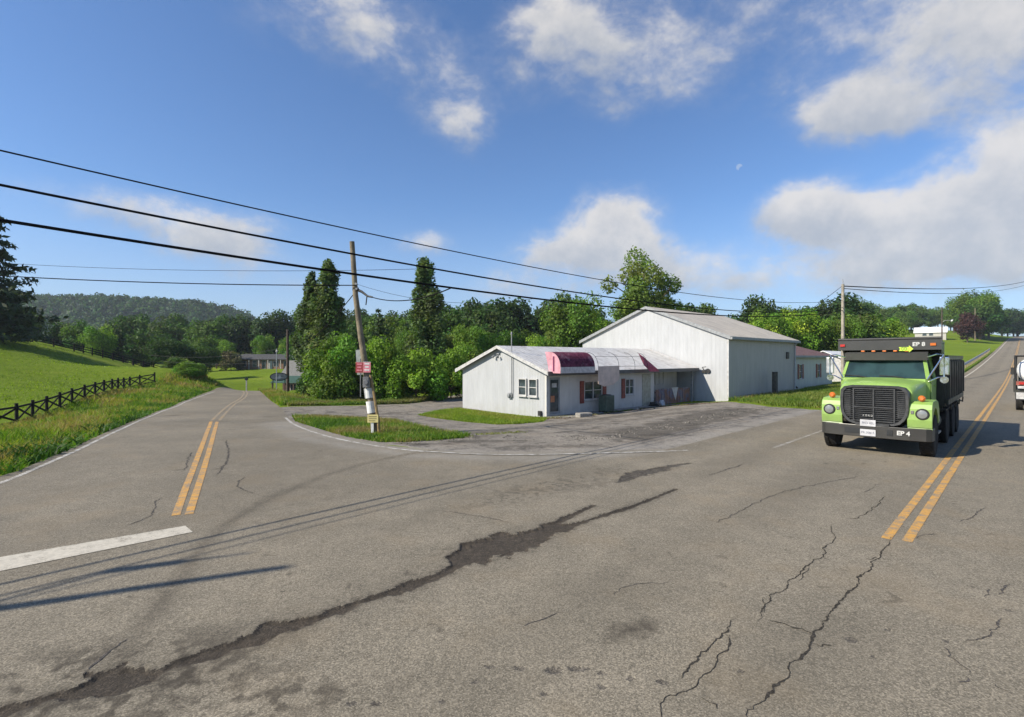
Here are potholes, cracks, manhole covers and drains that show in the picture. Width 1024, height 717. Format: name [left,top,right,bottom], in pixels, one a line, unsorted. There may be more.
crack [0,440,736,717]
crack [719,475,894,716]
crack [943,618,1002,682]
